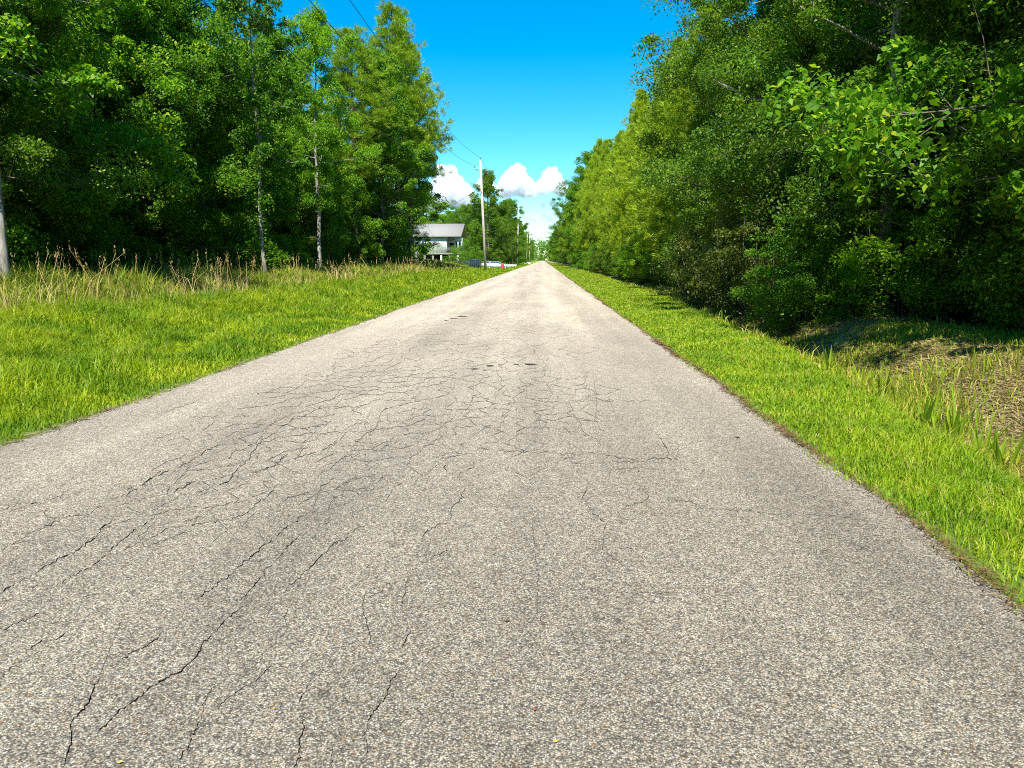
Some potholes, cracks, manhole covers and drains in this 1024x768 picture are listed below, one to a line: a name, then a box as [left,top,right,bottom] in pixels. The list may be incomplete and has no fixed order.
crack [1,301,705,768]
